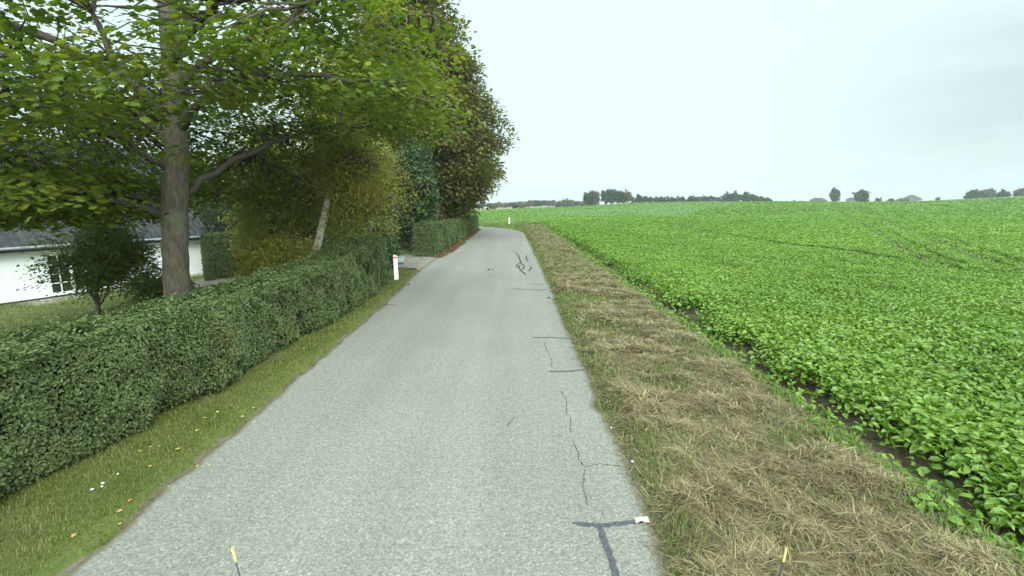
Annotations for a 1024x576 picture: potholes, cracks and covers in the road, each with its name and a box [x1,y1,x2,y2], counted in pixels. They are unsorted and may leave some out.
crack [566,399,616,514]
